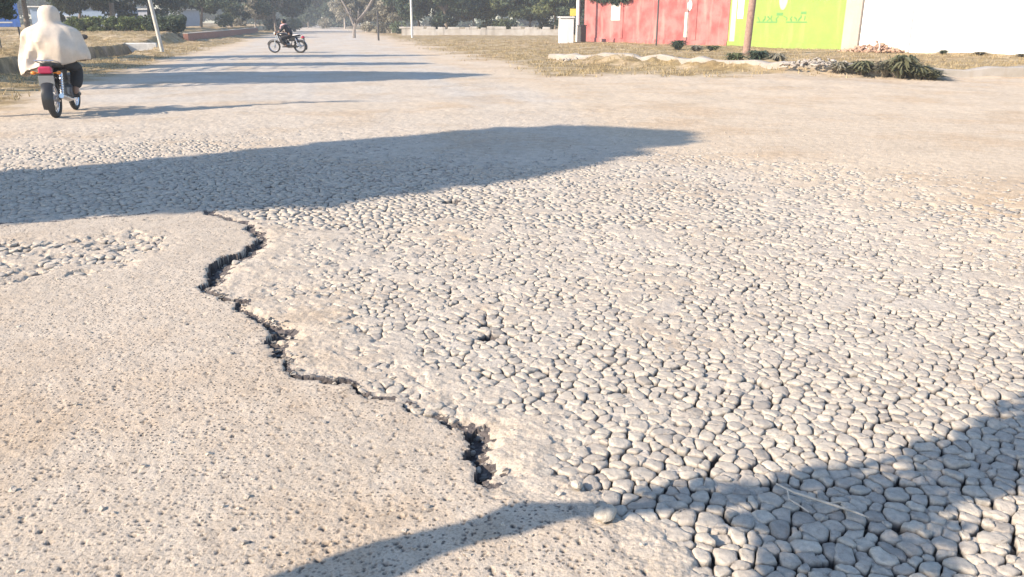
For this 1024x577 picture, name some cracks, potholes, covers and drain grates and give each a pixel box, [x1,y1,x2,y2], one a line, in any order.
crack [0,208,509,489]
